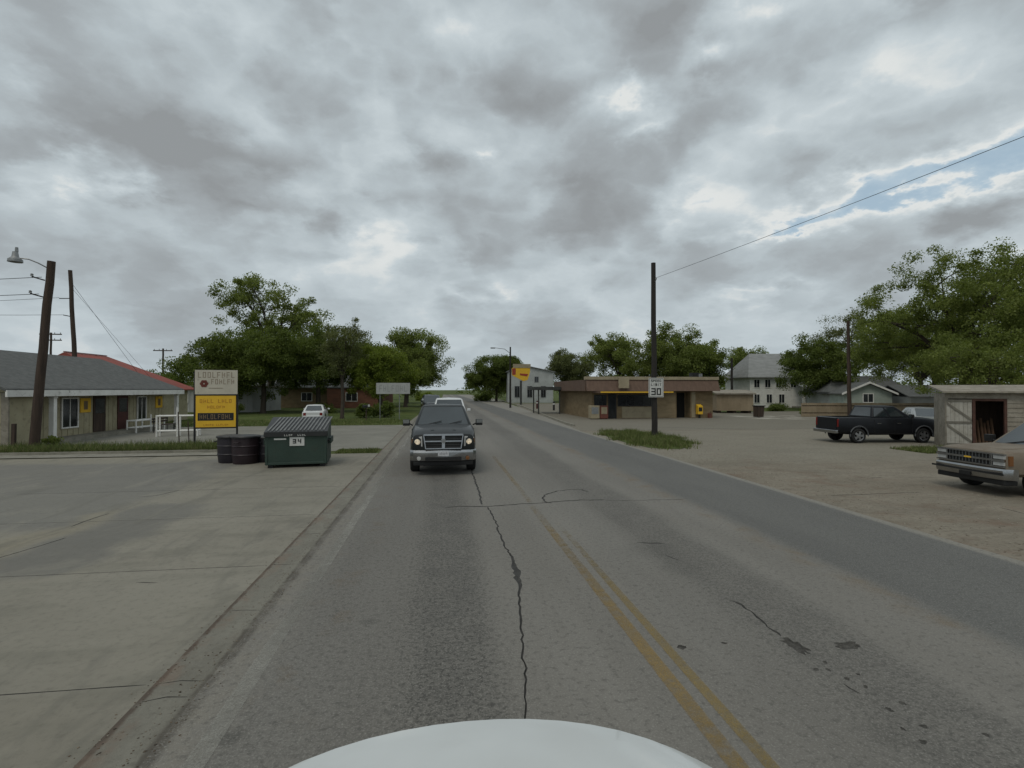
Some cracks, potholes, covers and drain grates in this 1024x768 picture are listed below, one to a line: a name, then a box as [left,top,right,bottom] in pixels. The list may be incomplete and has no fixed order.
crack [729,600,781,636]
crack [445,470,680,719]
pothole [834,641,861,650]
